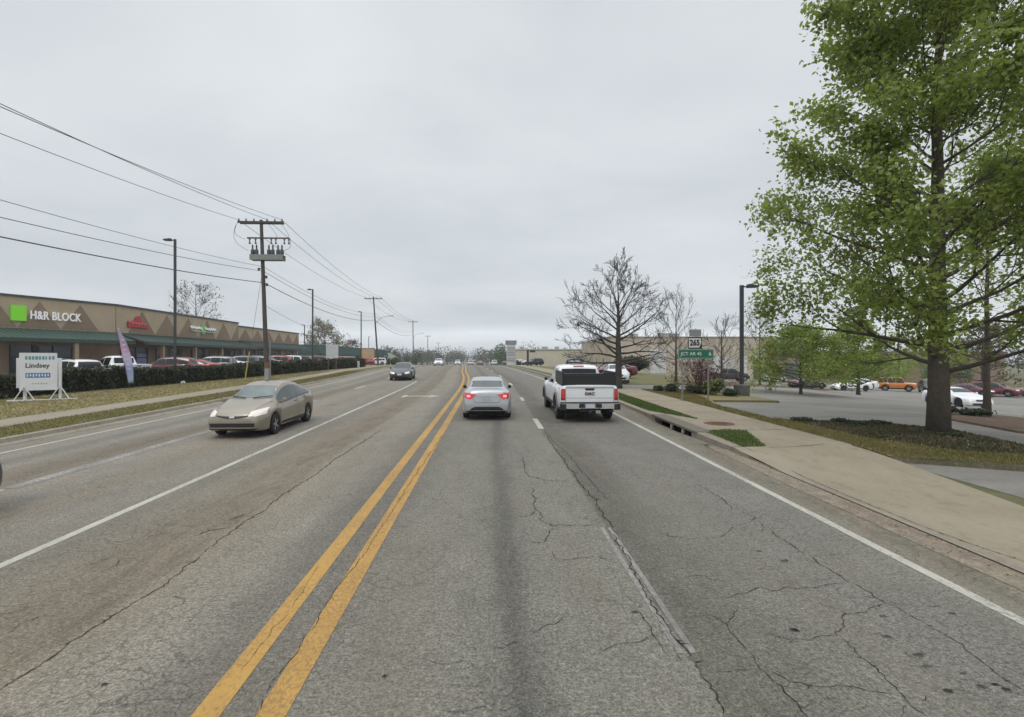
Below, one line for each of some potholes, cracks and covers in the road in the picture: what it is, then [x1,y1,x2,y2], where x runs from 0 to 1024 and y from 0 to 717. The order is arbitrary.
drain grate [651,414,713,438]
crack [698,484,1023,717]
crack [603,607,686,669]
crack [522,458,598,560]
